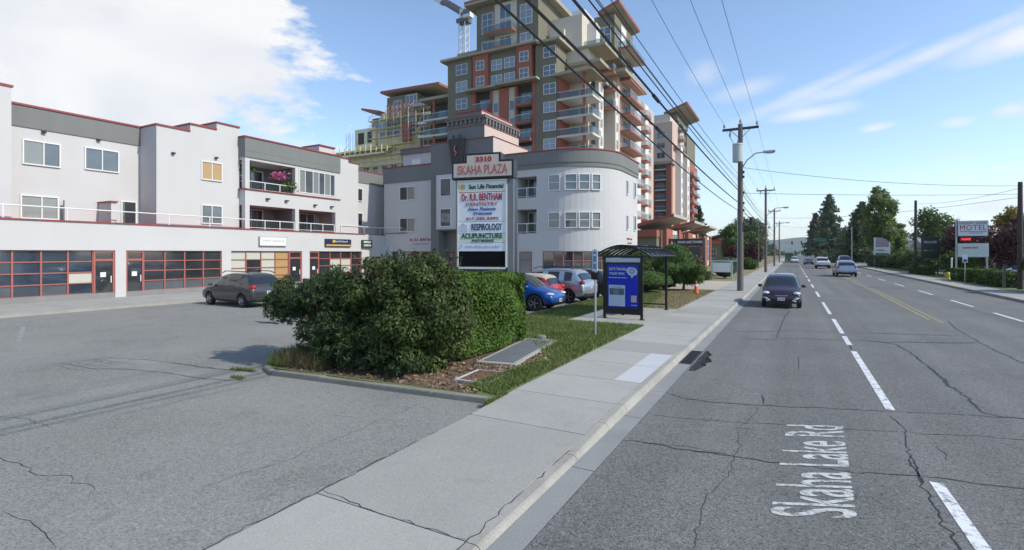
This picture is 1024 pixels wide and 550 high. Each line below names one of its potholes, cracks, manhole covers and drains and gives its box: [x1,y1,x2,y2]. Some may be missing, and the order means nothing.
crack [1,458,95,495]
crack [869,340,1023,419]
drain grate [679,350,703,365]
crack [202,413,472,550]
crack [648,406,1024,550]
